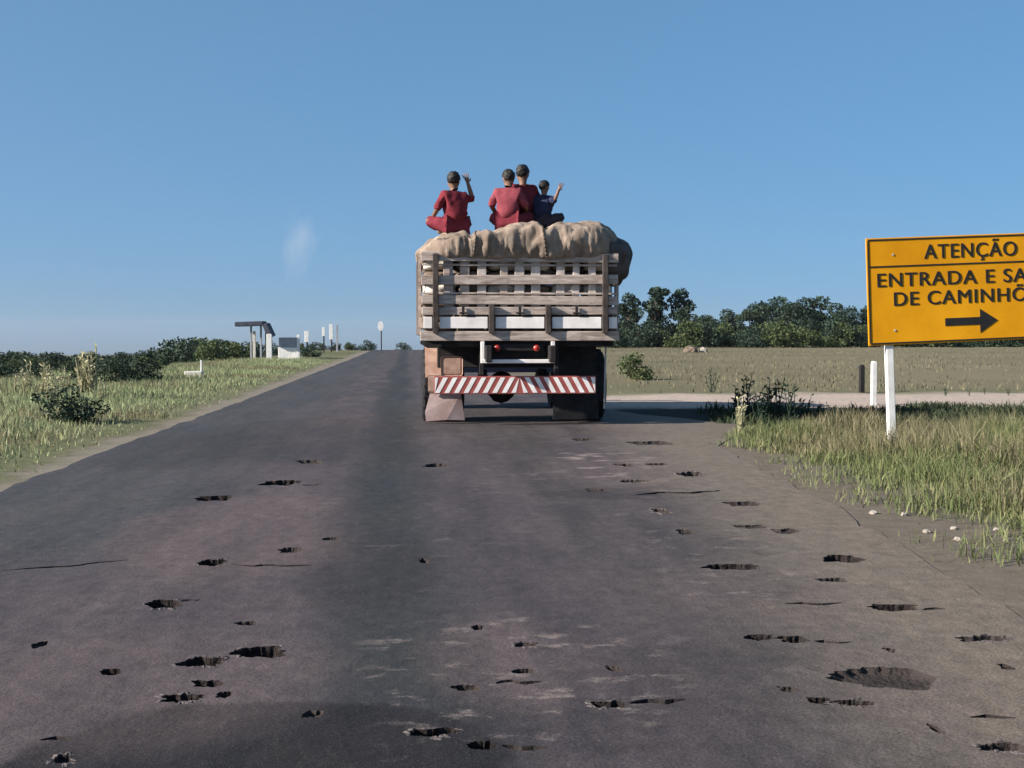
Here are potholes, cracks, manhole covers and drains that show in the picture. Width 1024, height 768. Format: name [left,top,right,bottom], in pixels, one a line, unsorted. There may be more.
pothole [806,697,835,705]
pothole [171,655,229,669]
pothole [955,634,1015,643]
pothole [155,691,206,705]
pothole [228,644,287,658]
pothole [46,751,77,767]
pothole [585,699,632,710]
pothole [142,598,185,610]
pothole [824,698,878,708]
pothole [402,727,465,740]
pothole [826,666,938,690]
crack [3,560,124,571]
